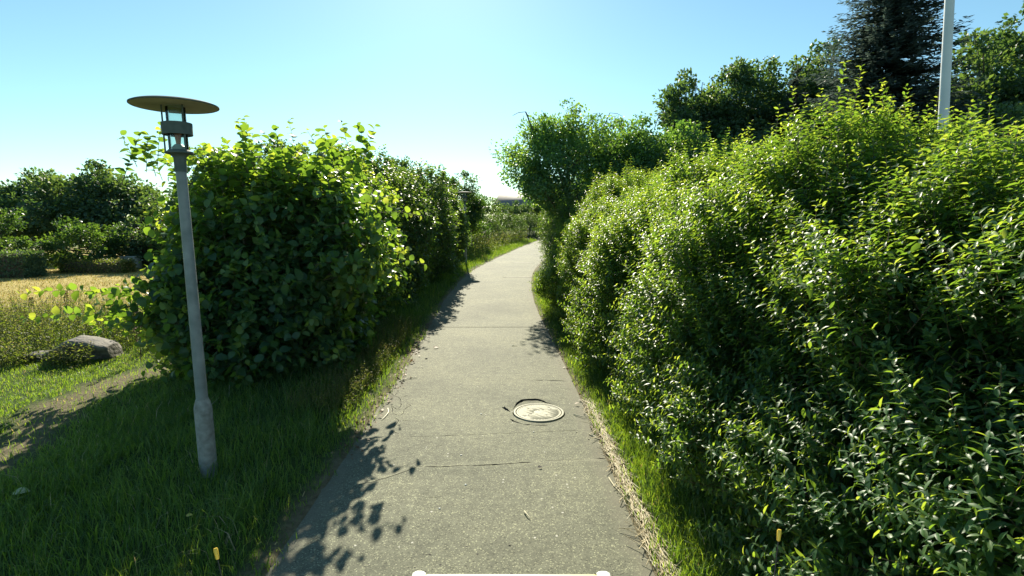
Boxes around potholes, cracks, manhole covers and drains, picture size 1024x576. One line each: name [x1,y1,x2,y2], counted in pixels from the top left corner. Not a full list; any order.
manhole cover [513,403,564,424]
